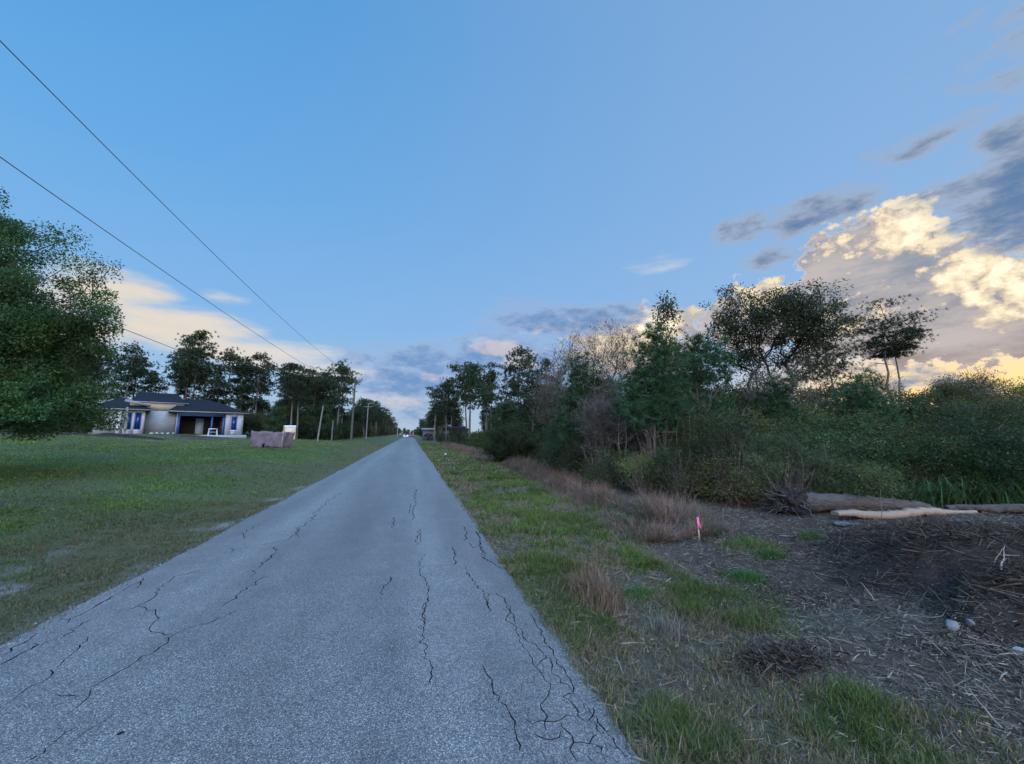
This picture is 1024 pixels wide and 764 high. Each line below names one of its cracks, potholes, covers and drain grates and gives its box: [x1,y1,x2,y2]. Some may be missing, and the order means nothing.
crack [0,570,238,763]
crack [452,527,626,764]
crack [390,489,433,697]
crack [224,496,335,605]
